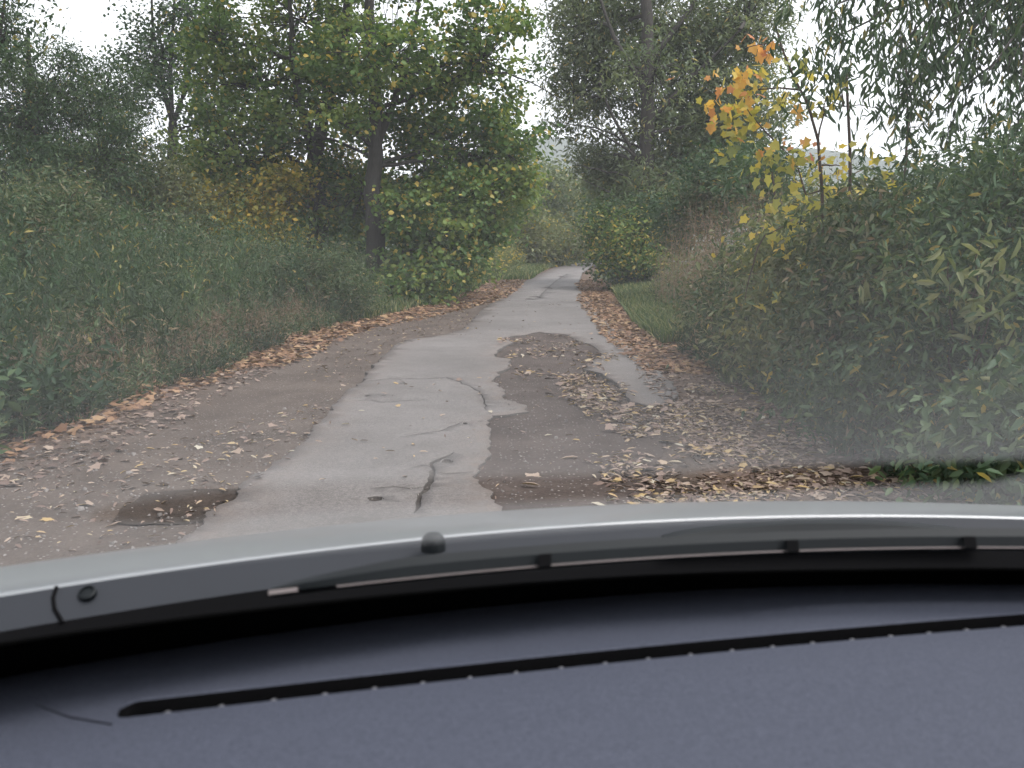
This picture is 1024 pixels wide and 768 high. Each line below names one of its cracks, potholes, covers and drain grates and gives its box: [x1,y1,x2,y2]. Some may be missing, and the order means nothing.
crack [416,461,439,511]
pothole [113,489,239,525]
pothole [475,333,671,511]
